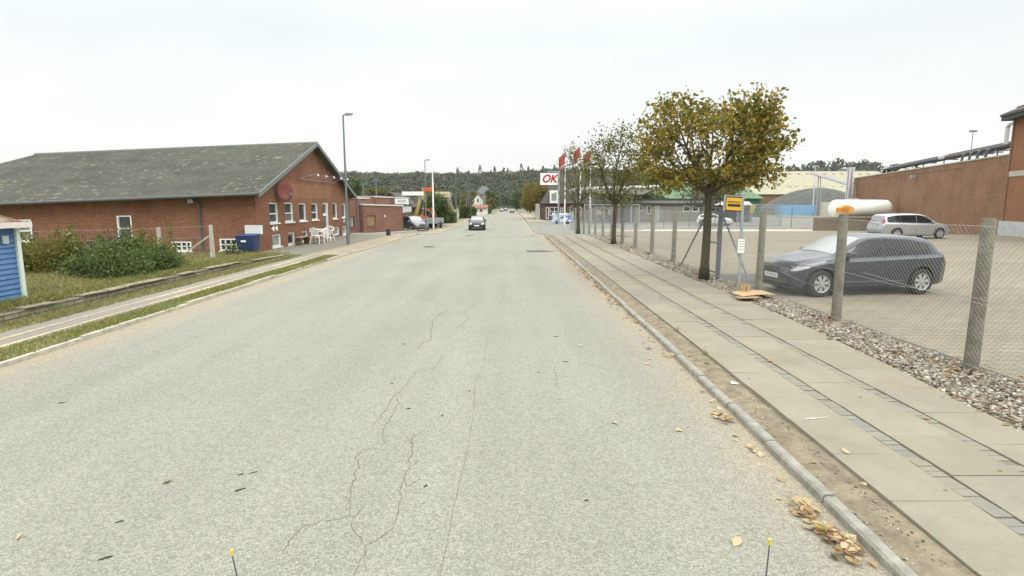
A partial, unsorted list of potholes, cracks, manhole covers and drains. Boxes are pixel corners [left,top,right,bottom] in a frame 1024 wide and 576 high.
crack [282,359,441,576]
